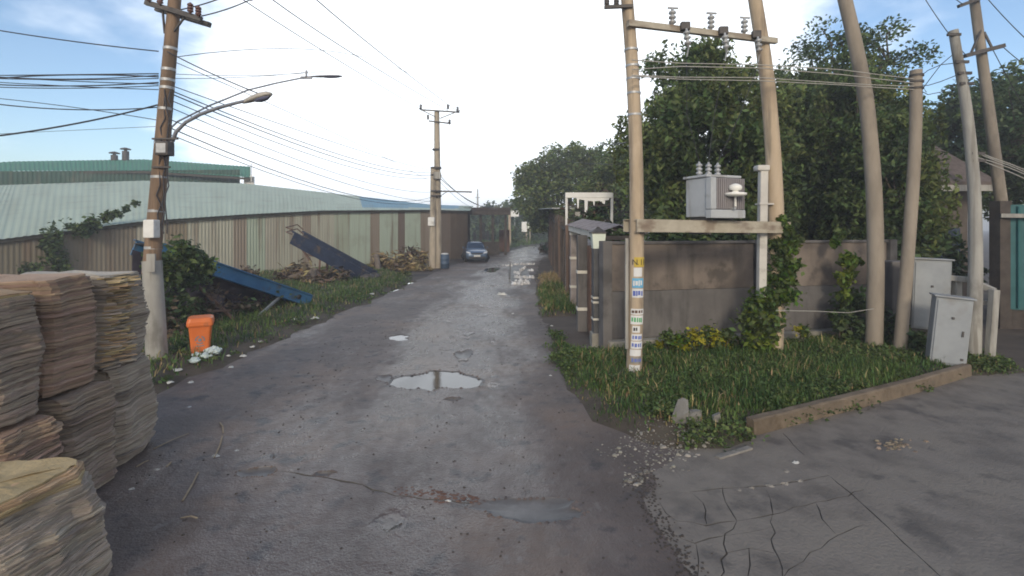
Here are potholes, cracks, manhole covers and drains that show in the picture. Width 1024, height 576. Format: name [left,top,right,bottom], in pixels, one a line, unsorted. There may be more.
pothole [464,496,591,524]
crack [284,471,471,504]
pothole [507,264,531,288]
crack [659,475,862,576]
pothole [452,349,473,359]
pothole [386,369,485,392]
